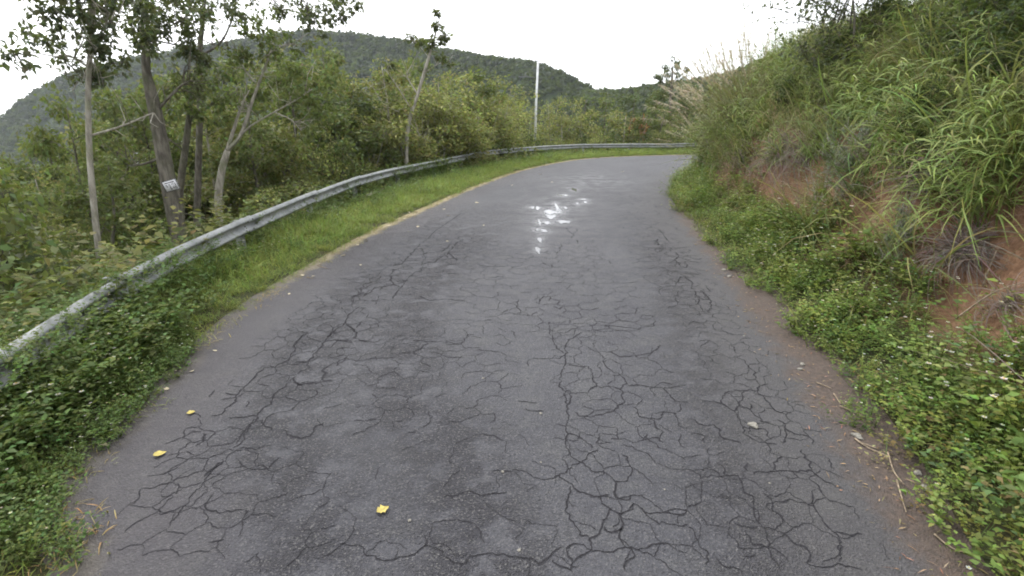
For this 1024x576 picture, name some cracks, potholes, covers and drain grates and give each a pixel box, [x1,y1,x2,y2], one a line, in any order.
crack [116,213,890,576]
